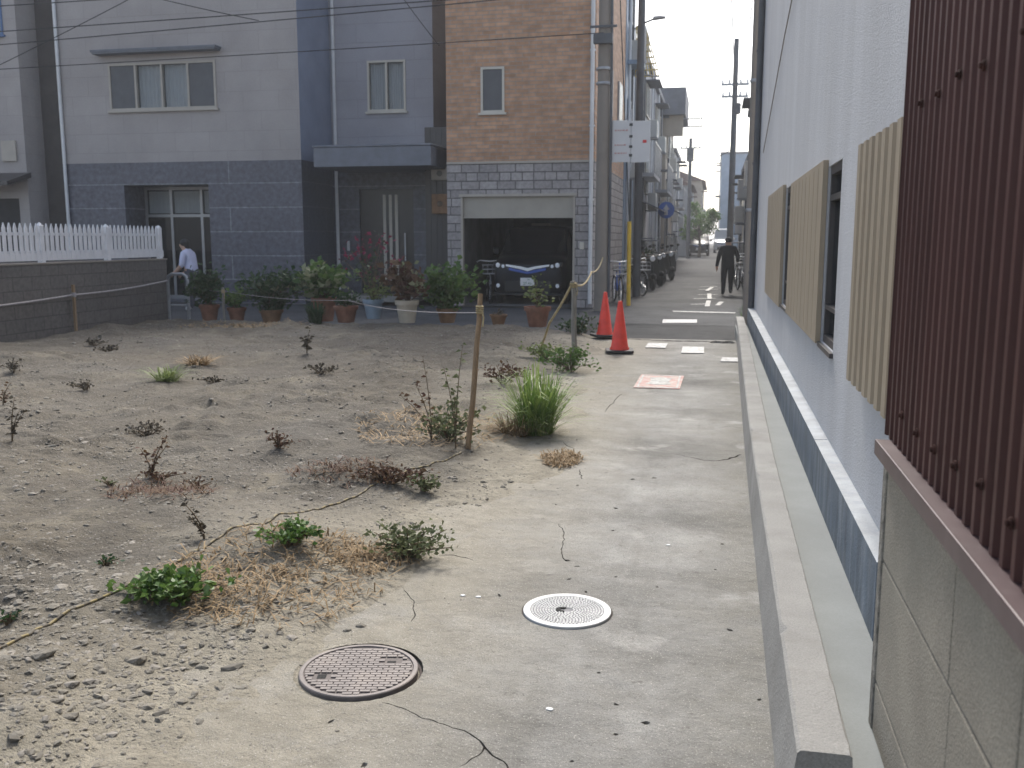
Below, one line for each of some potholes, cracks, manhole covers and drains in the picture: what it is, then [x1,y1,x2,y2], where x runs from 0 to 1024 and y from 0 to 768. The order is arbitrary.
manhole cover [522,593,613,630]
manhole cover [299,644,423,702]
crack [382,702,509,768]
